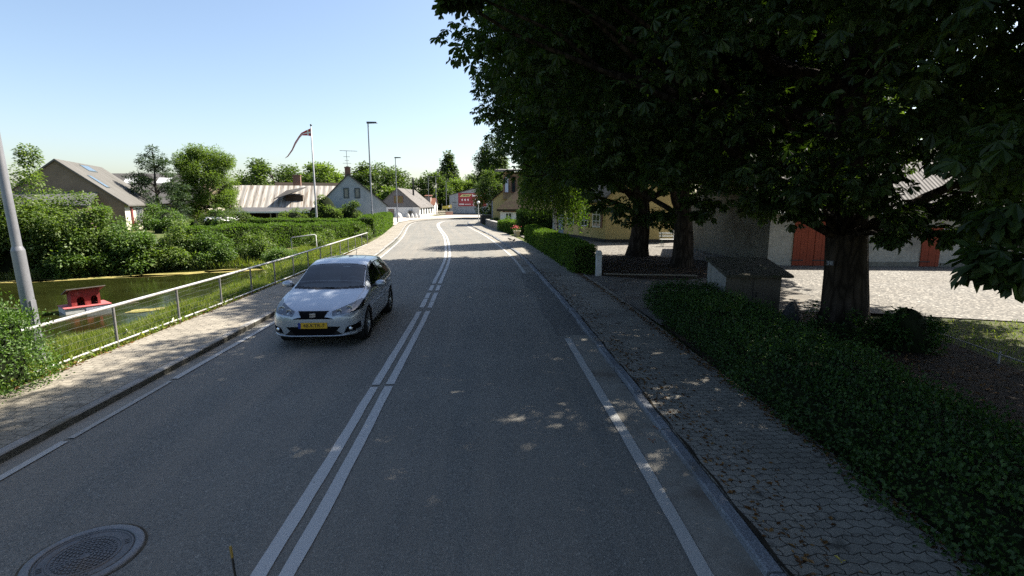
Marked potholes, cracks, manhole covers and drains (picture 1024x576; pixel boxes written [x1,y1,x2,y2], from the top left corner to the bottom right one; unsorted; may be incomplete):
manhole cover [14,523,148,576]
